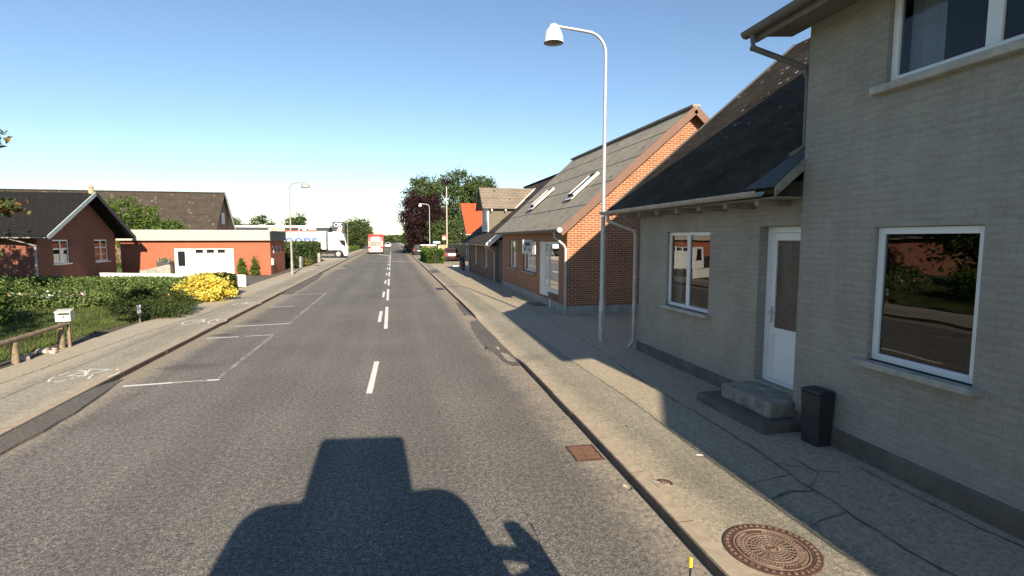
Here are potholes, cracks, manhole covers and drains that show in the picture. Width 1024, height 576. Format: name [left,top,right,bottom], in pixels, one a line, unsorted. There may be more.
manhole cover [722,524,824,576]
